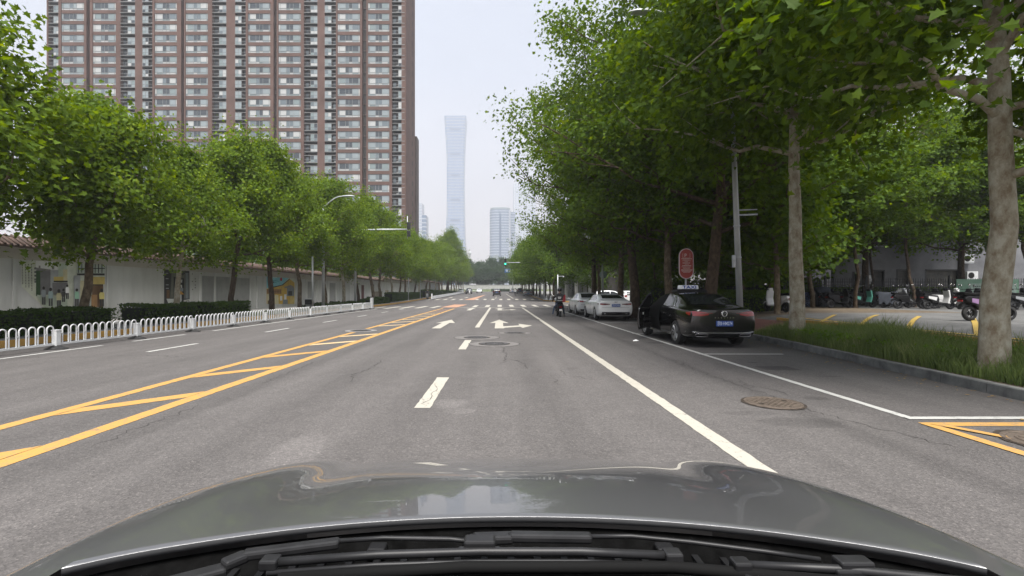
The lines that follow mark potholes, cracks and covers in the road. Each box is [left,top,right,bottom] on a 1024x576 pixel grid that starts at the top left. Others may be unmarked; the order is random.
manhole cover [993,429,1024,446]
manhole cover [741,396,807,410]
